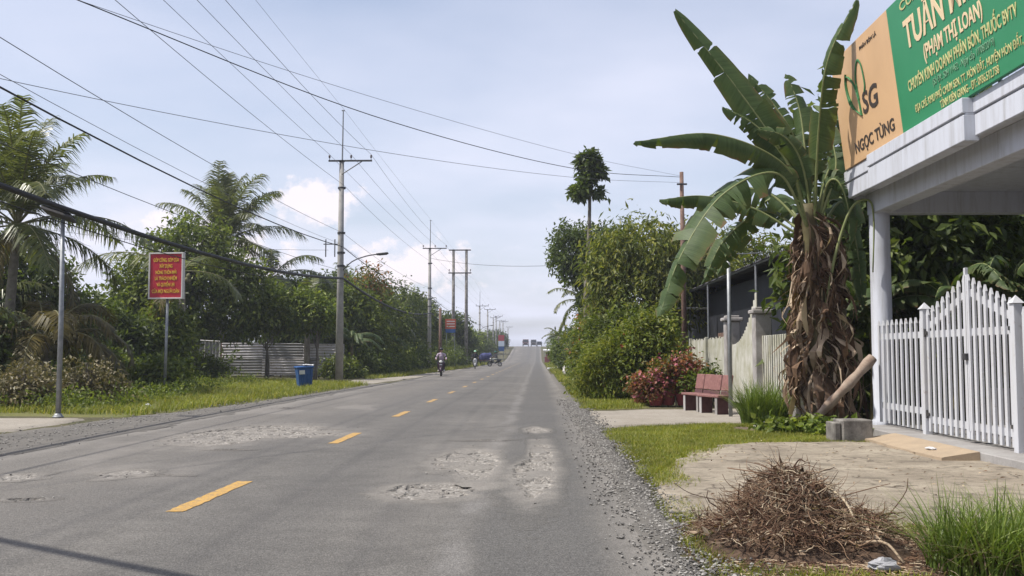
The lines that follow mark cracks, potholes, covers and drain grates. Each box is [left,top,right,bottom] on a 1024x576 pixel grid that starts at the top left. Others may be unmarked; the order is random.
pothole [416,445,508,491]
pothole [486,431,573,548]
pothole [0,471,61,483]
pothole [356,480,516,504]
pothole [86,467,168,482]
pothole [156,424,357,448]
pothole [517,425,558,436]
